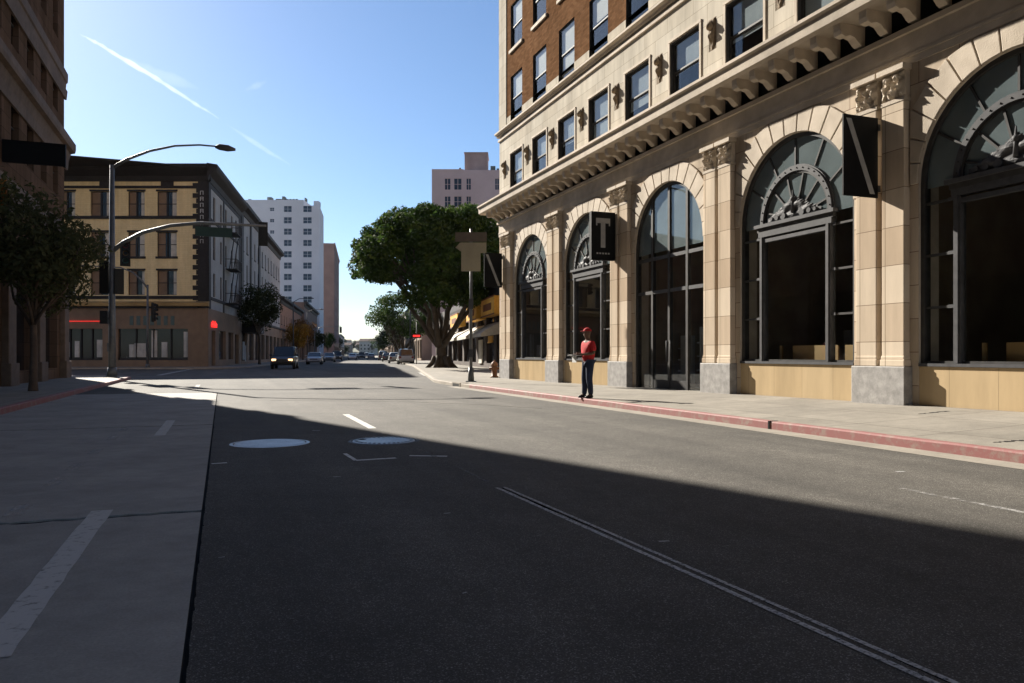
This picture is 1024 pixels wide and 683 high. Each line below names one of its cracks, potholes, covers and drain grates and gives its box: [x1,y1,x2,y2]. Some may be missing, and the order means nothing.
manhole cover [348,437,419,445]
manhole cover [229,439,310,448]
